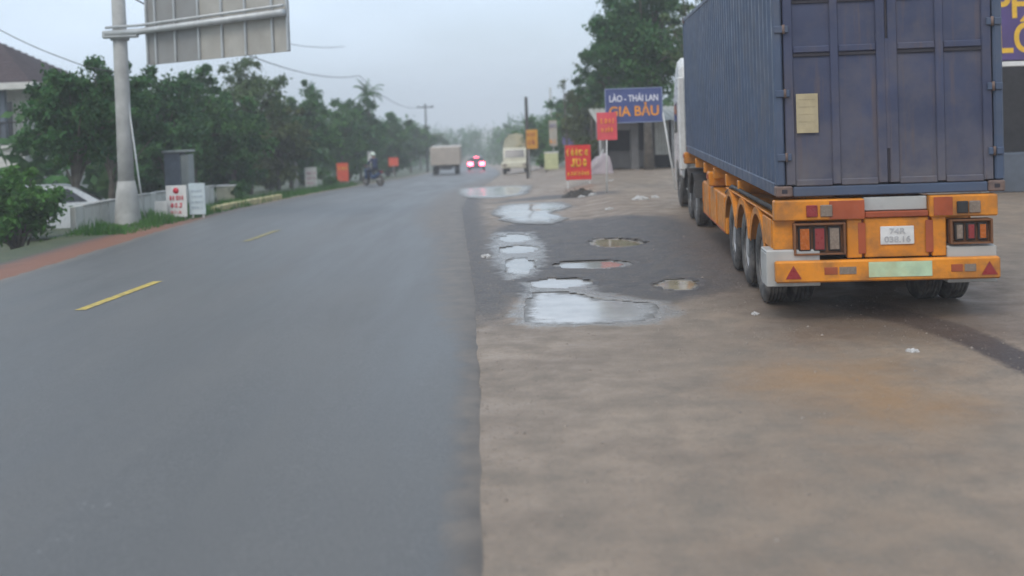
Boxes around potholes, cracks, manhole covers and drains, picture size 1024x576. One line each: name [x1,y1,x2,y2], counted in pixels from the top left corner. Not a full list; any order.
pothole [640,276,714,293]
pothole [578,236,659,249]
pothole [485,243,551,255]
pothole [490,255,546,278]
pothole [513,275,608,292]
pothole [485,232,543,244]
pothole [505,288,677,328]
pothole [534,258,647,270]
